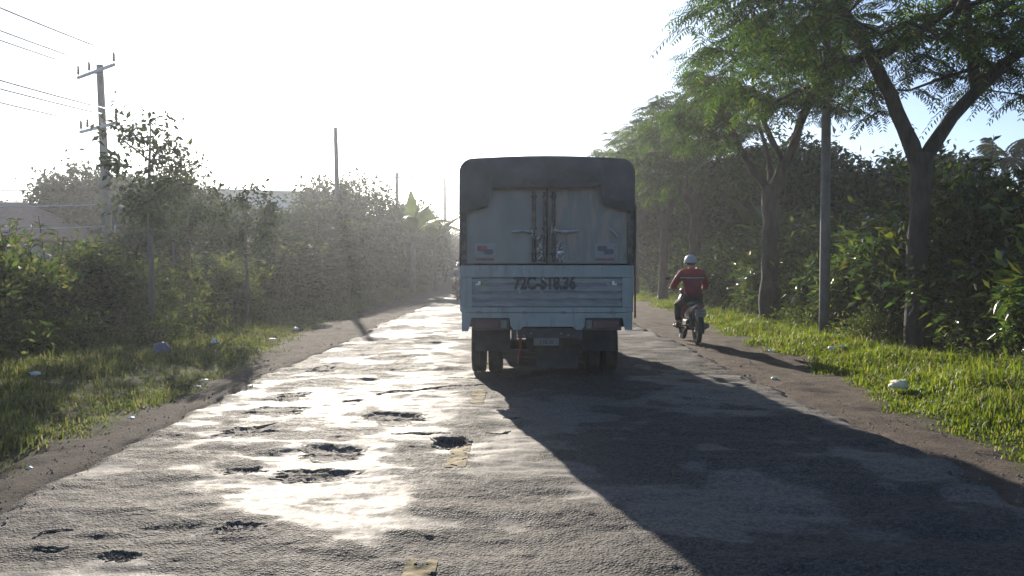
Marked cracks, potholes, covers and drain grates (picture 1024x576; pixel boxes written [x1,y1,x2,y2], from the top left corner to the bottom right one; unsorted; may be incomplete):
pothole [268,468,365,484]
pothole [97,549,143,562]
pothole [215,465,271,475]
pothole [296,442,368,464]
pothole [210,520,271,535]
pothole [200,422,283,439]
pothole [356,410,432,427]
pothole [430,436,473,450]
